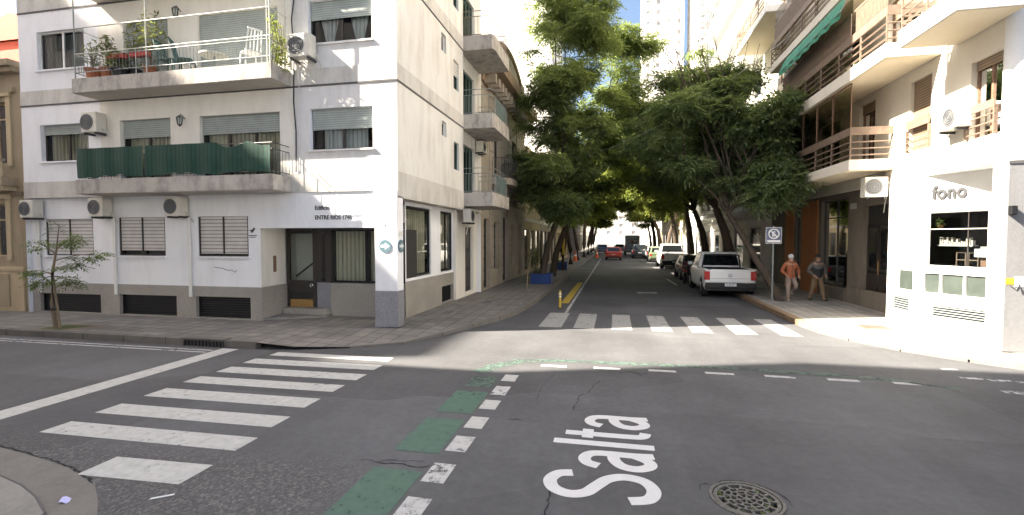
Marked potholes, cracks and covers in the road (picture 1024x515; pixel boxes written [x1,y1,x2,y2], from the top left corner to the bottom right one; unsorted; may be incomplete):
drain grate [181,335,232,348]
manhole cover [709,481,787,515]
